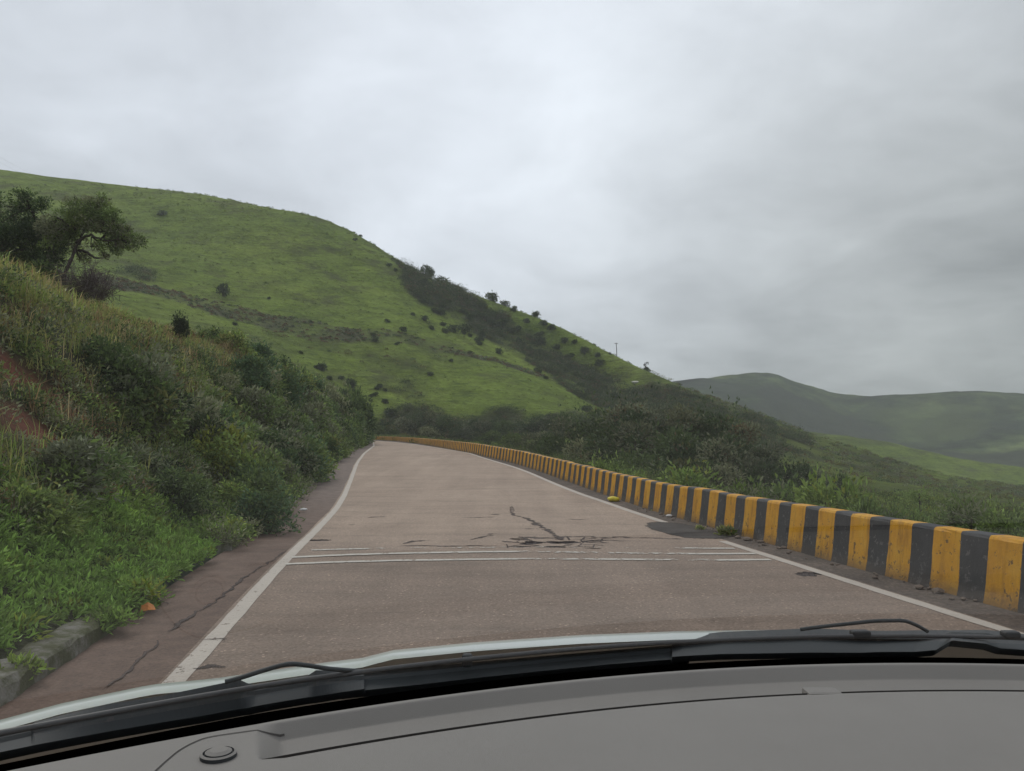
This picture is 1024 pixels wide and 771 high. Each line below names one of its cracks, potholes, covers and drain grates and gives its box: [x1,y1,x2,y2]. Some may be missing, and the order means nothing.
crack [106,551,286,687]
crack [405,512,679,548]
